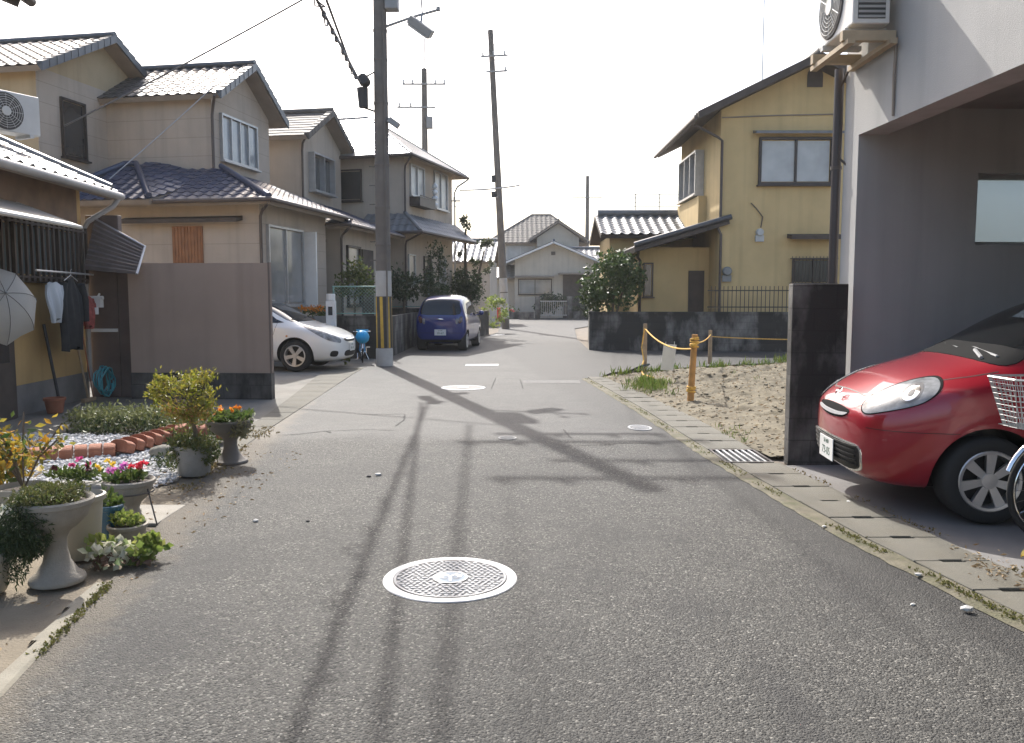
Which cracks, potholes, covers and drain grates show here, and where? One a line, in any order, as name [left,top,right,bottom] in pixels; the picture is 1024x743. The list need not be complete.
manhole cover [383,557,517,603]
drain grate [709,449,774,464]
